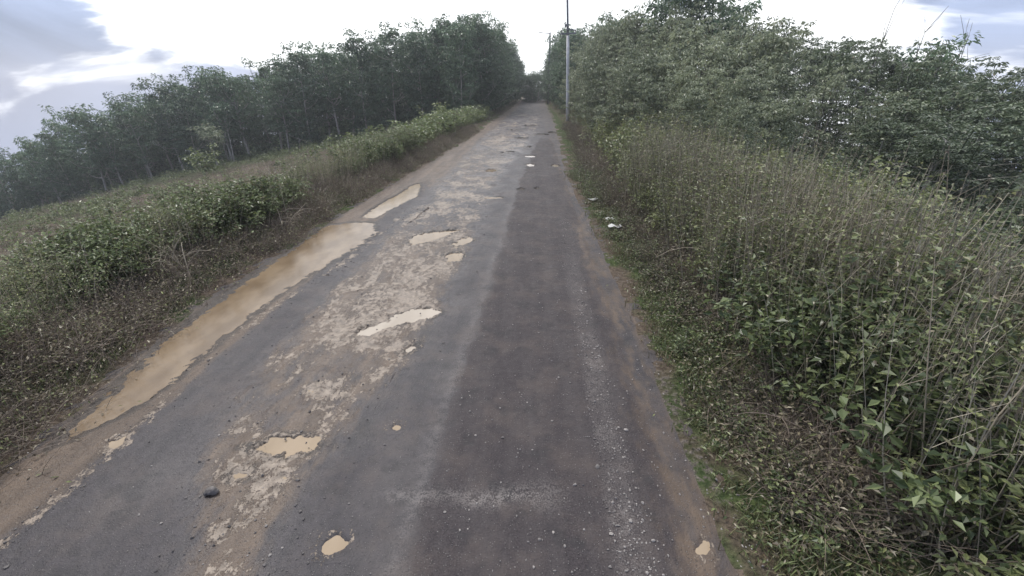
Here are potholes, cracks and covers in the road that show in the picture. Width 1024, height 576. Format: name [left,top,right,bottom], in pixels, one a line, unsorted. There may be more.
pothole [446,235,481,250]
pothole [31,220,382,458]
pothole [438,250,471,264]
pothole [232,429,329,464]
pothole [346,304,448,340]
pothole [682,526,725,571]
pothole [354,181,426,220]
pothole [402,226,468,248]
pothole [302,524,360,567]
